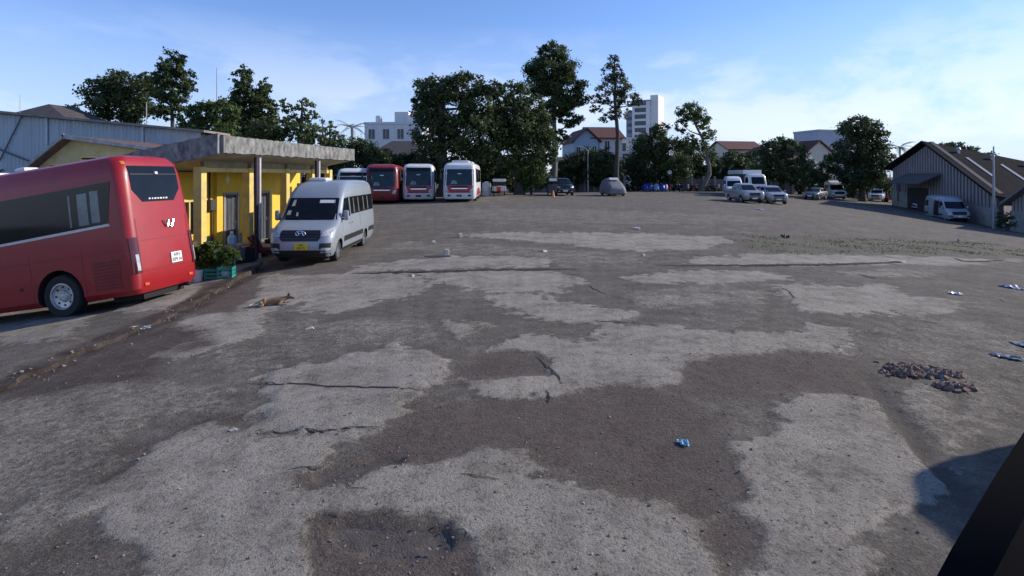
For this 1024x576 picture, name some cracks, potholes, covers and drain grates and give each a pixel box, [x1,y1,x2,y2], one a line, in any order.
pothole [310,508,477,573]
crack [249,382,426,392]
crack [536,356,561,403]
